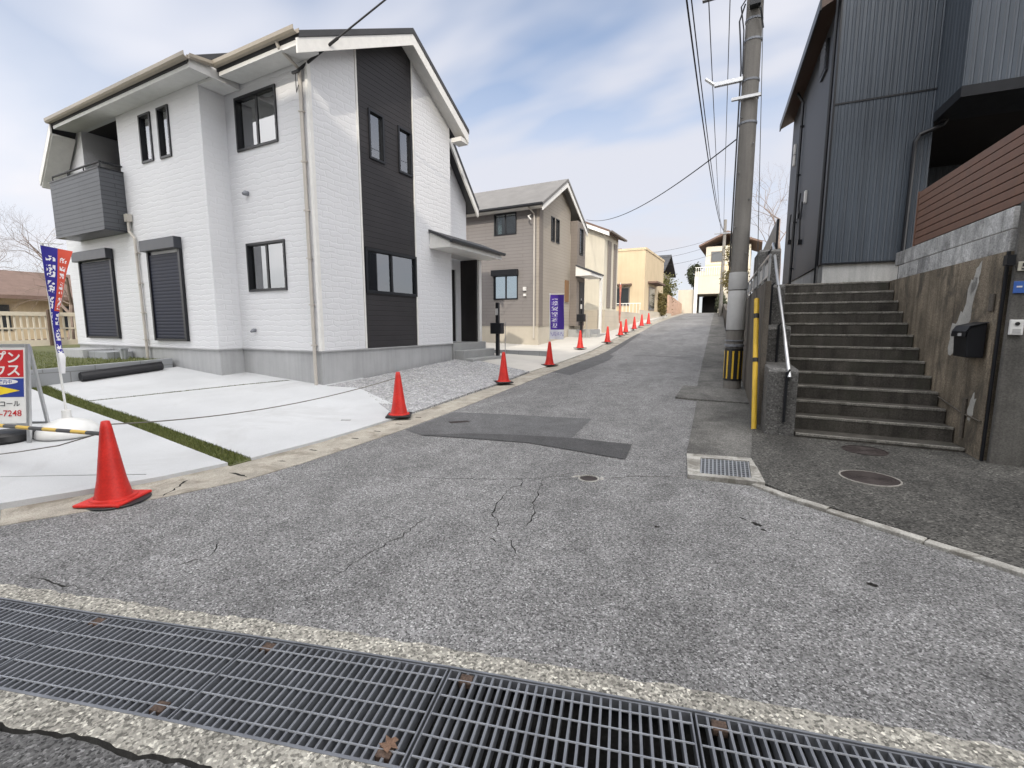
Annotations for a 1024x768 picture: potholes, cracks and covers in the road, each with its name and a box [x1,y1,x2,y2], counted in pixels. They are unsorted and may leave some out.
manhole cover [839,470,903,487]
crack [385,473,670,554]
drain grate [694,713,973,768]
drain grate [0,615,257,719]
crack [331,517,427,577]
crack [0,722,212,768]
drain grate [686,453,765,486]
drain grate [170,639,448,768]
manhole cover [841,445,889,456]
drain grate [0,600,90,666]
drain grate [404,669,701,768]
crack [30,577,91,590]
